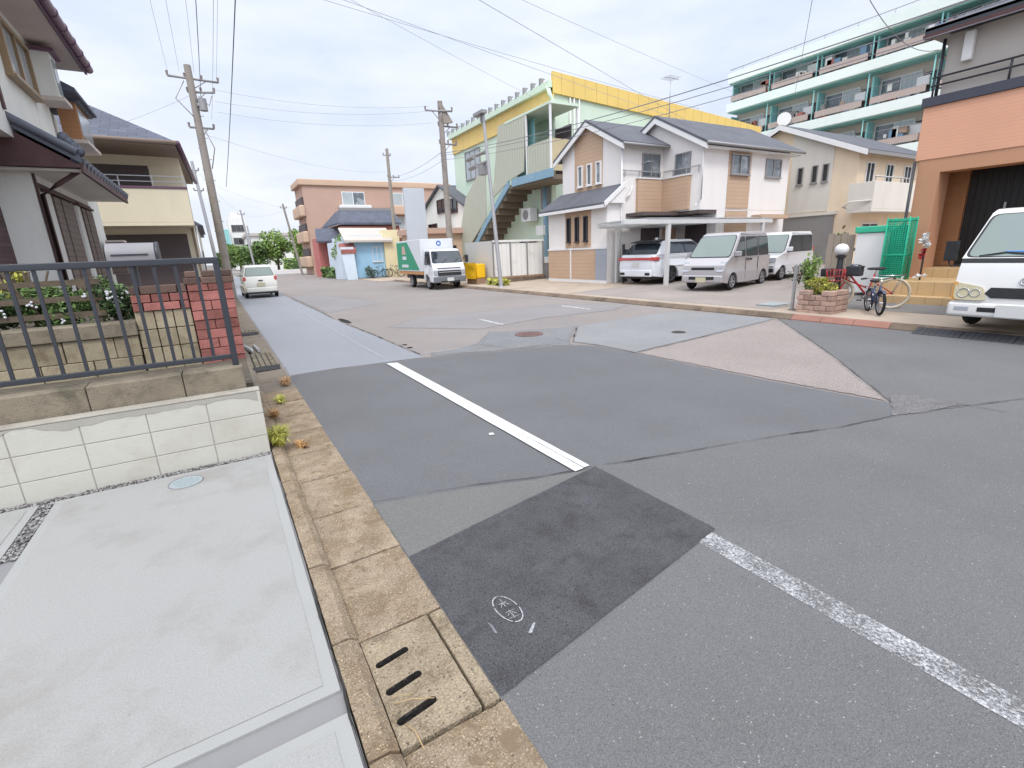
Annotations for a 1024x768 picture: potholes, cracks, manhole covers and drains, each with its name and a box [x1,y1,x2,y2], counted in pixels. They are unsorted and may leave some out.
crack [605,319,1023,464]
drain grate [250,352,281,372]
